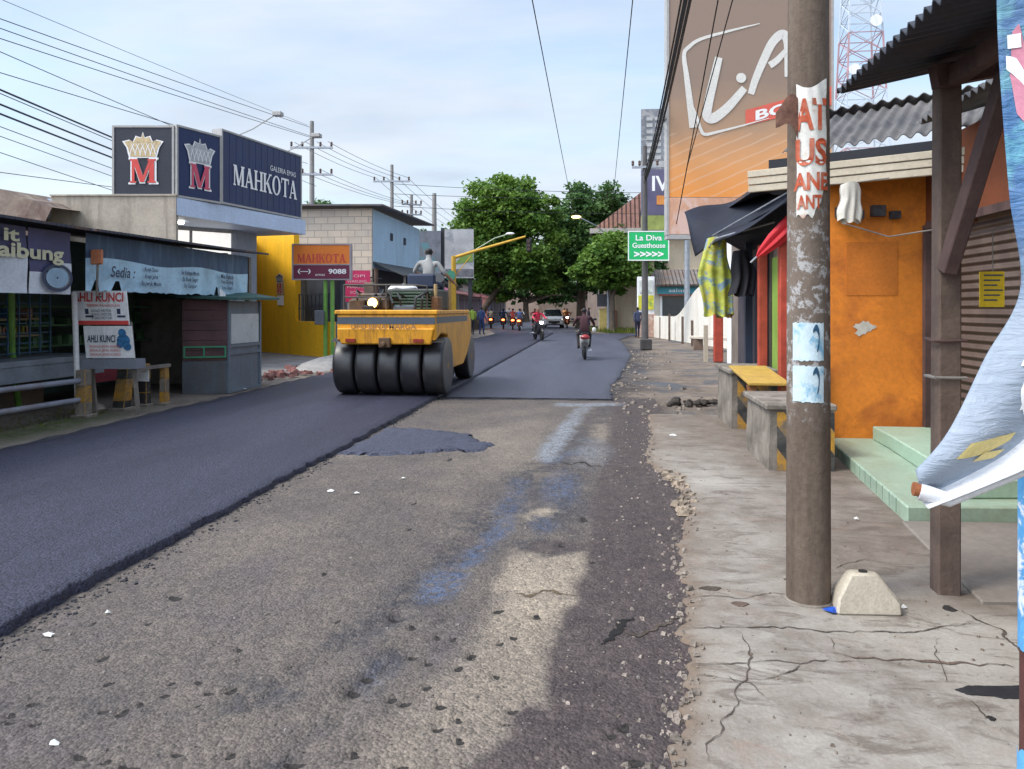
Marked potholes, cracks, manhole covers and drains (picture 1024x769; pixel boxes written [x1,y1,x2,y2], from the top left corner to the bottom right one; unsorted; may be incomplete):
crack [518,589,579,597]
crack [698,632,862,758]
crack [601,615,681,644]
